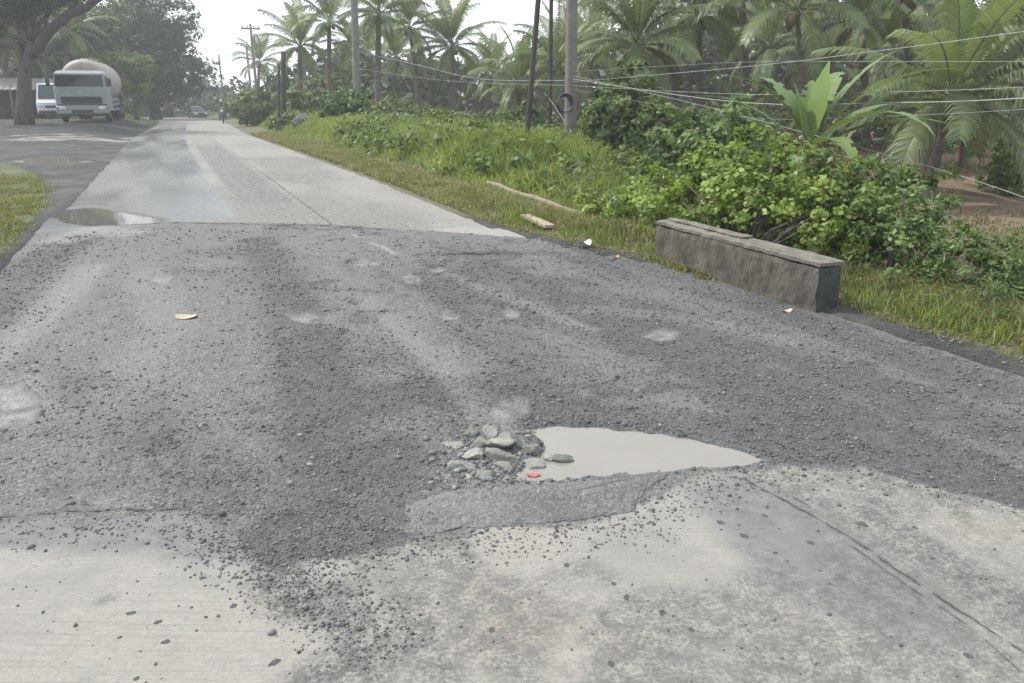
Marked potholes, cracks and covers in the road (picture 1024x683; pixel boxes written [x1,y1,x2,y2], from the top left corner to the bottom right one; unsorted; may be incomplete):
pothole [513,422,778,482]
